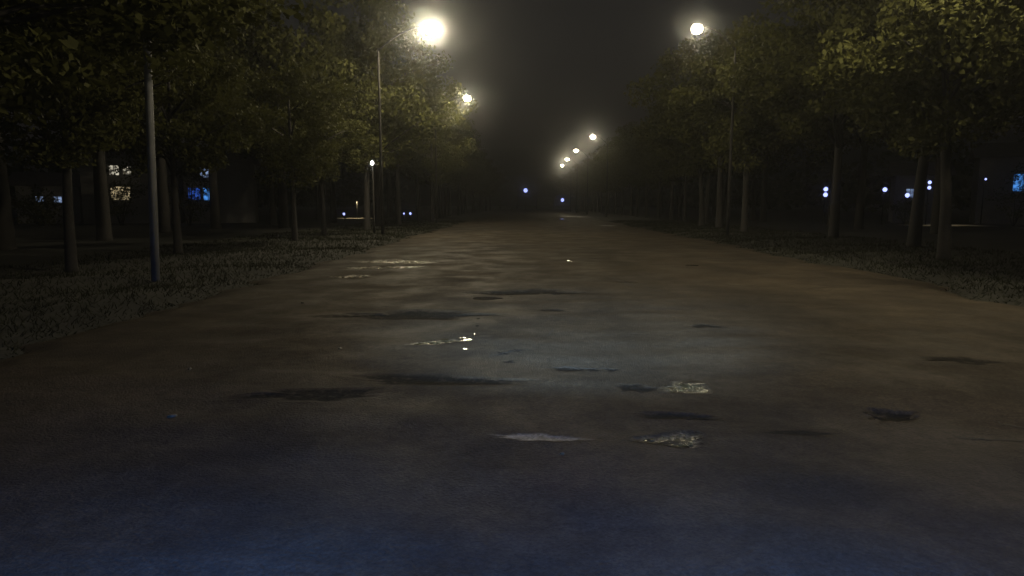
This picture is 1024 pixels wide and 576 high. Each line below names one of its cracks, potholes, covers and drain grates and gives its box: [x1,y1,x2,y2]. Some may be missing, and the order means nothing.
pothole [450,288,604,296]
pothole [913,356,1019,366]
pothole [337,372,550,386]
pothole [210,386,398,403]
pothole [485,432,599,442]
pothole [860,407,925,422]
pothole [628,411,729,420]
pothole [627,429,709,449]
pothole [657,380,717,395]
pothole [290,308,518,320]
